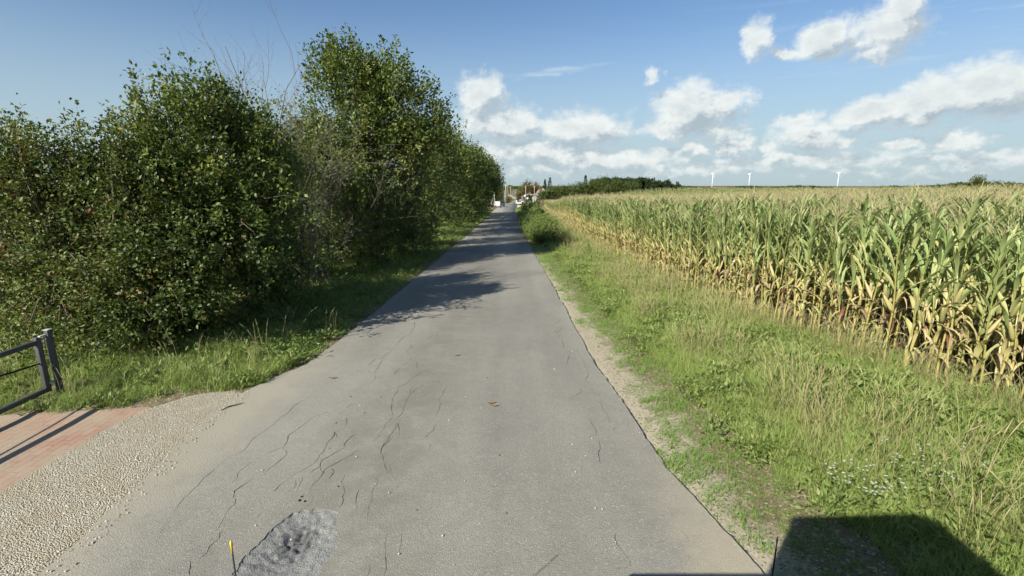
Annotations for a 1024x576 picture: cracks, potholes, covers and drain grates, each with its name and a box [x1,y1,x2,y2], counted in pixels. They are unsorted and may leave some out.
crack [551,307,618,464]
crack [156,313,430,576]
